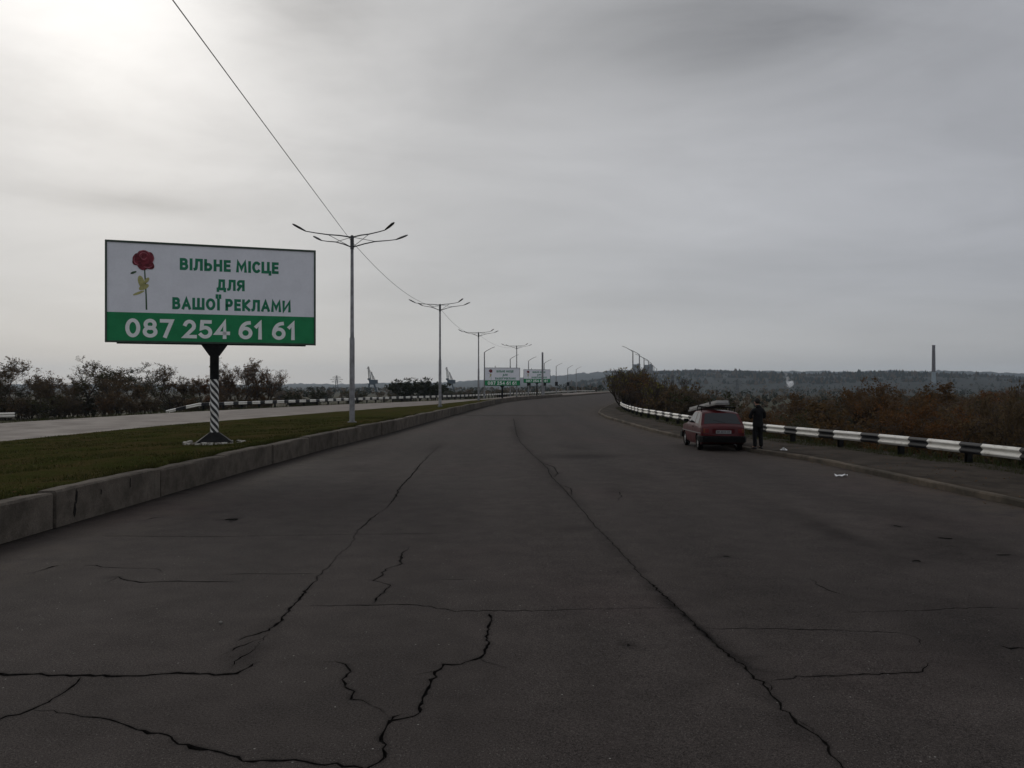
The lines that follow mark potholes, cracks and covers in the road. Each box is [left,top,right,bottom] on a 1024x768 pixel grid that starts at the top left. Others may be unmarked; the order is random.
crack [698,628,921,645]
crack [50,451,636,768]
